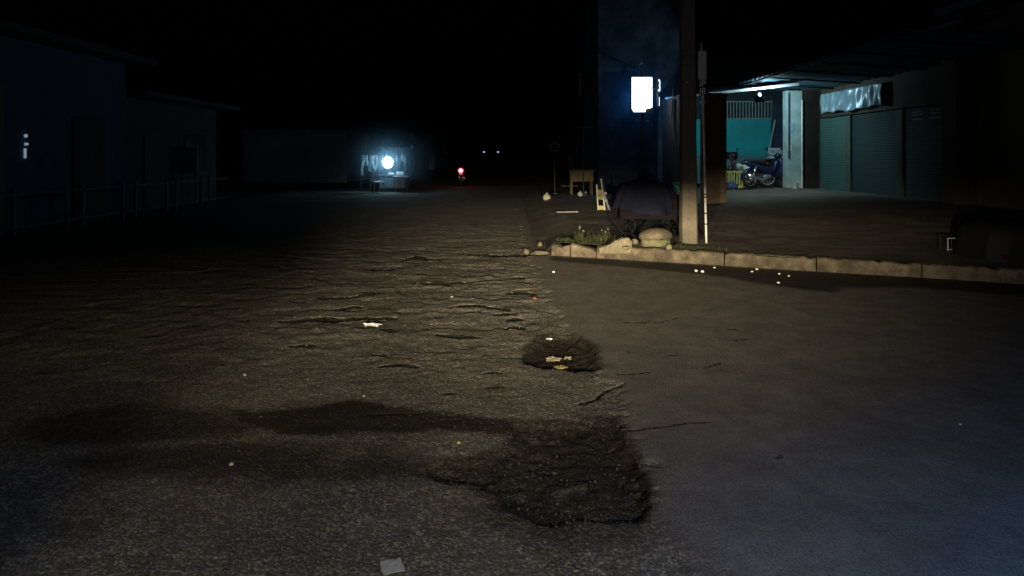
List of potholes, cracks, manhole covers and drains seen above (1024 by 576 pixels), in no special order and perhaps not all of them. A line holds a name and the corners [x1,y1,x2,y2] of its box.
crack [578,372,650,405]
crack [370,250,441,271]
crack [618,422,711,435]
crack [278,292,400,333]
crack [375,355,419,368]
crack [449,277,536,330]
crack [484,372,502,389]
pothole [523,334,601,373]
